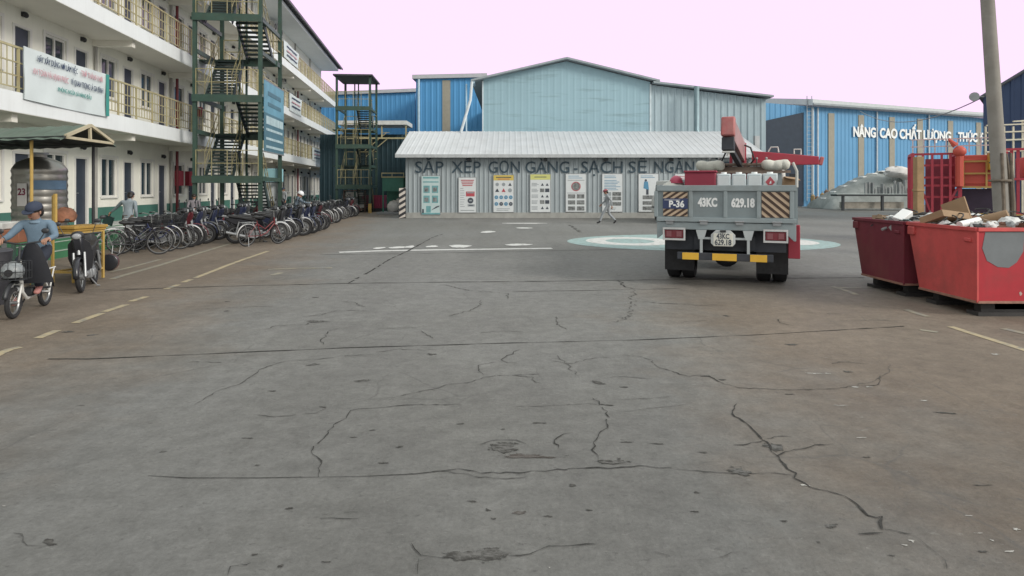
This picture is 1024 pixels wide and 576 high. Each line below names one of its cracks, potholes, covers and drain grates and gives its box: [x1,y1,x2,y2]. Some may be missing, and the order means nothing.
crack [417,395,947,568]
crack [617,358,891,390]
crack [264,350,540,477]
pothole [487,442,519,455]
crack [197,301,435,403]
pothole [442,547,509,563]
